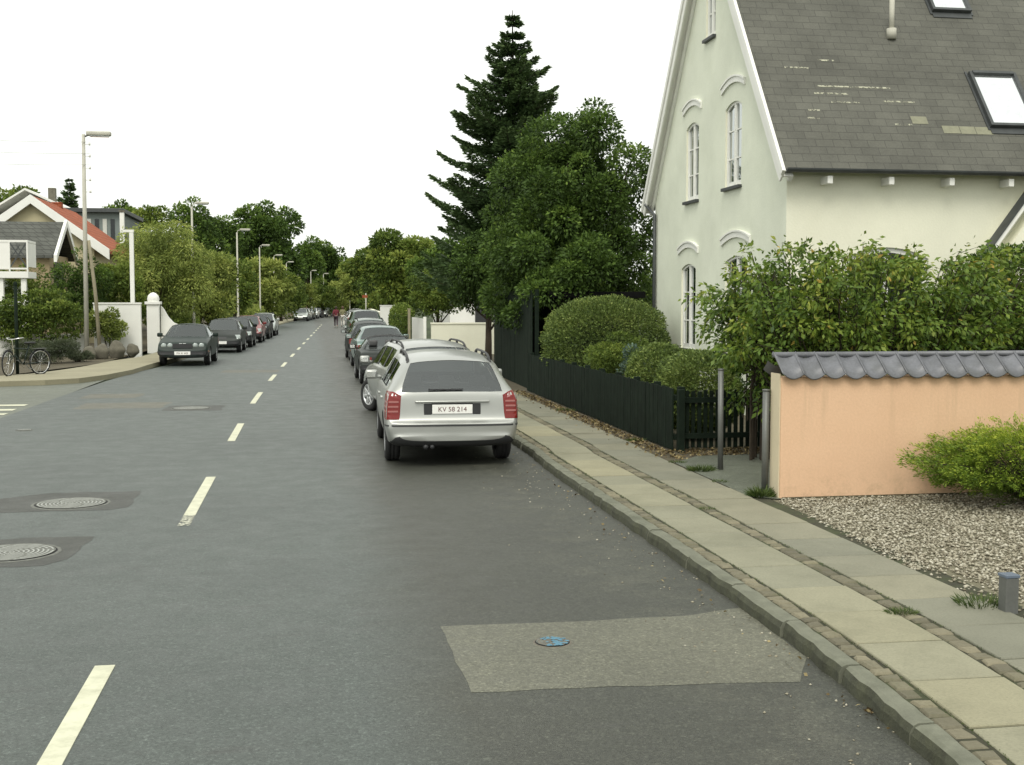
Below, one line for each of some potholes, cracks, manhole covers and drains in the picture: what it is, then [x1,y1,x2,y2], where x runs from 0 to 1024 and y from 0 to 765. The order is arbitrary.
manhole cover [31,497,111,510]
manhole cover [533,636,572,648]
manhole cover [0,543,62,563]
